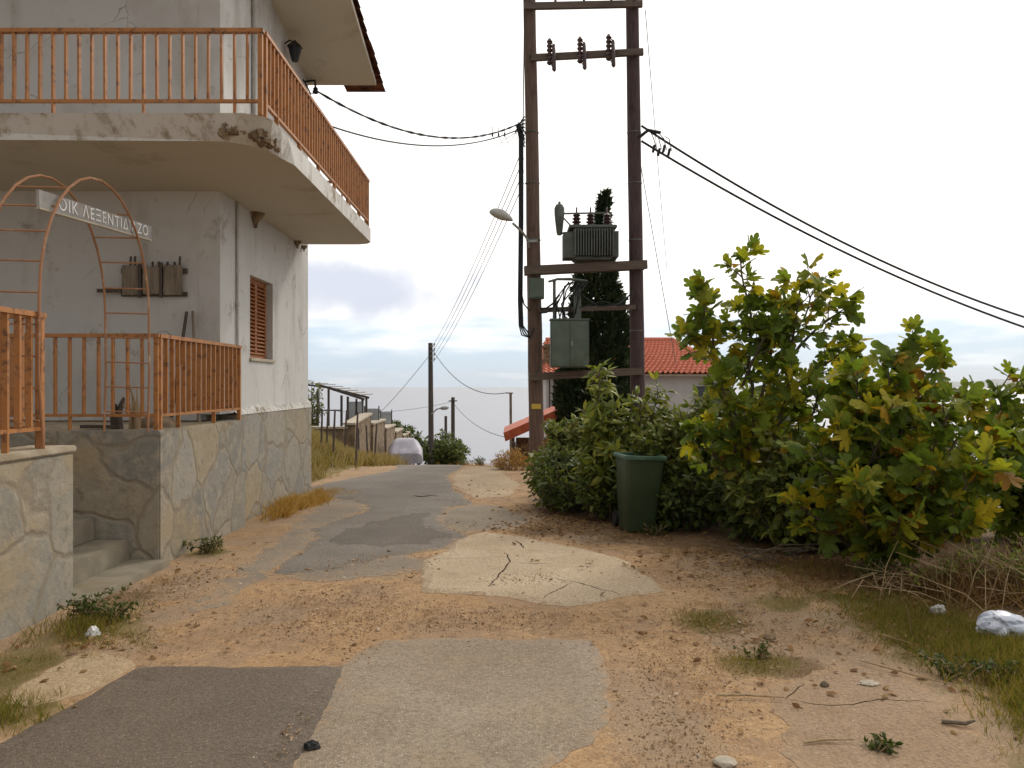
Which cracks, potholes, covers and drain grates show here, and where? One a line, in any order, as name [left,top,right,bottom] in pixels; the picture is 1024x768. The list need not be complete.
crack [447,540,620,598]
